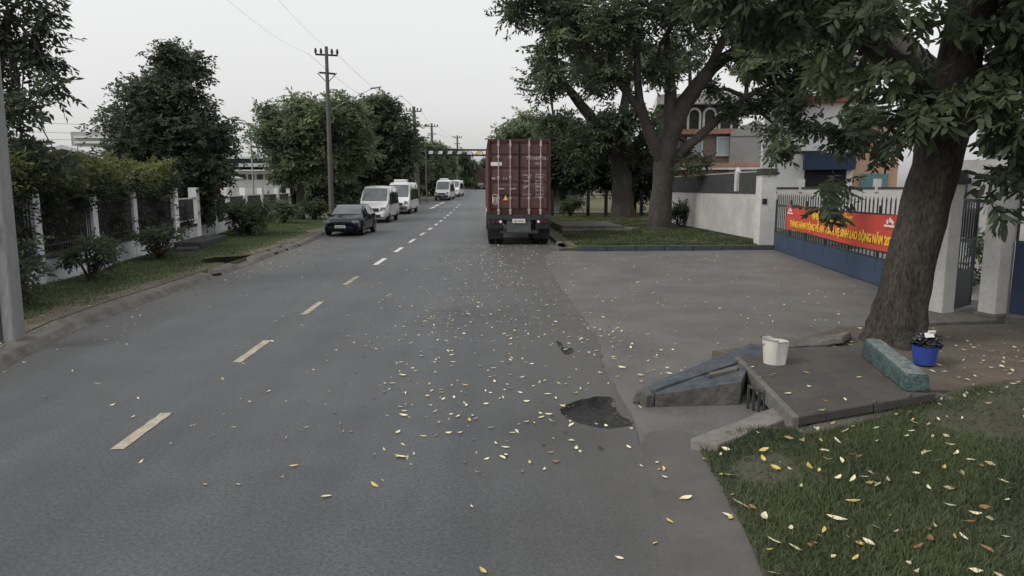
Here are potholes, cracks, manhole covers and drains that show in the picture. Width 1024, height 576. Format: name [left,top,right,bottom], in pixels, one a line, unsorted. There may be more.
pothole [560,396,633,429]
